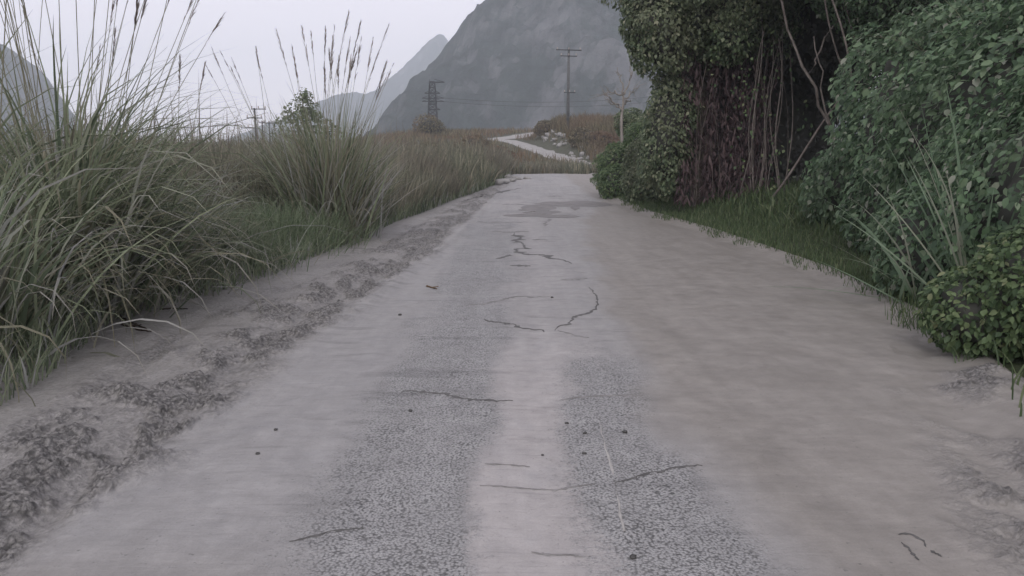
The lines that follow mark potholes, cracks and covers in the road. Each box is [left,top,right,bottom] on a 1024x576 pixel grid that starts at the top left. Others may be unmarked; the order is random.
crack [898,532,942,560]
crack [403,390,513,402]
crack [459,188,599,338]
crack [289,528,364,542]
crack [616,464,702,482]
